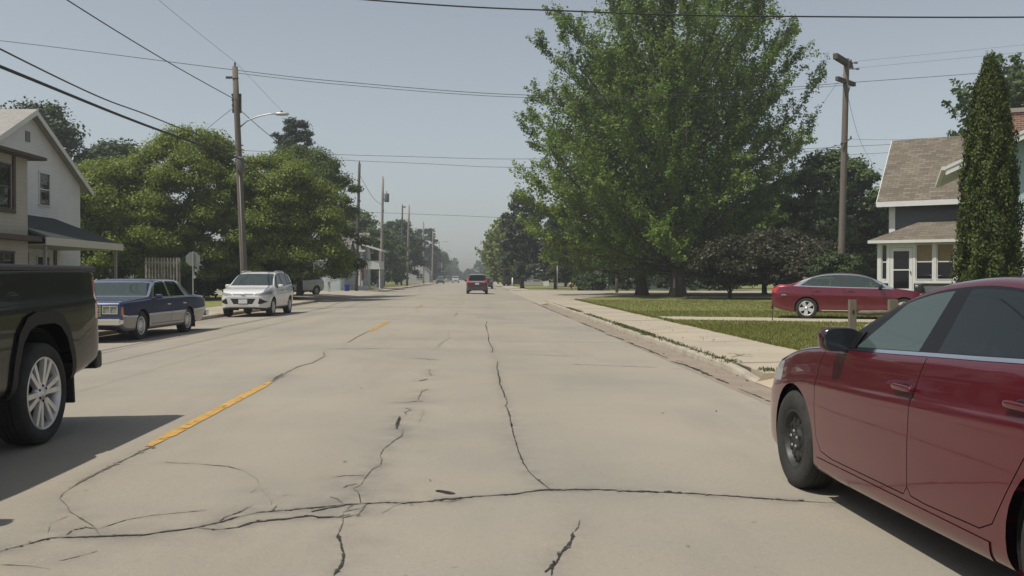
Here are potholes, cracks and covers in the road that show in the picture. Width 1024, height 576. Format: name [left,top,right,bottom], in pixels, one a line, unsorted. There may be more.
crack [2,299,836,576]
